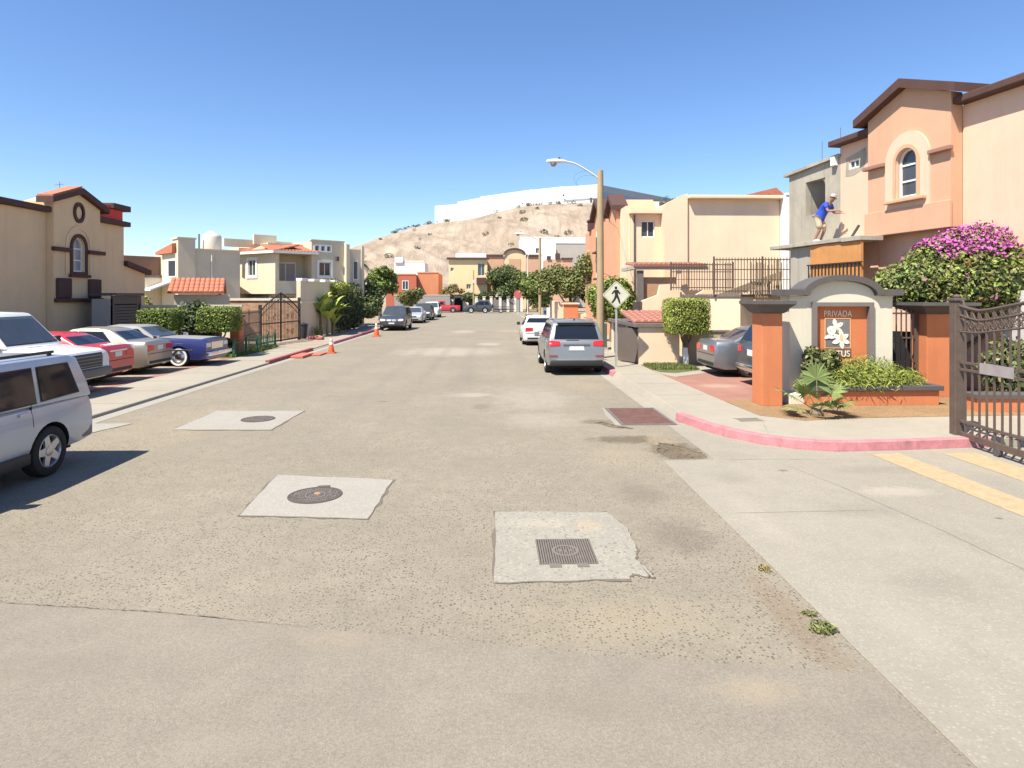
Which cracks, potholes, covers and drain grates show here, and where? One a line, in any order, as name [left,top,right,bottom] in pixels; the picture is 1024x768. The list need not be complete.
manhole cover [287,485,343,504]
drain grate [605,408,677,425]
pothole [656,442,708,459]
